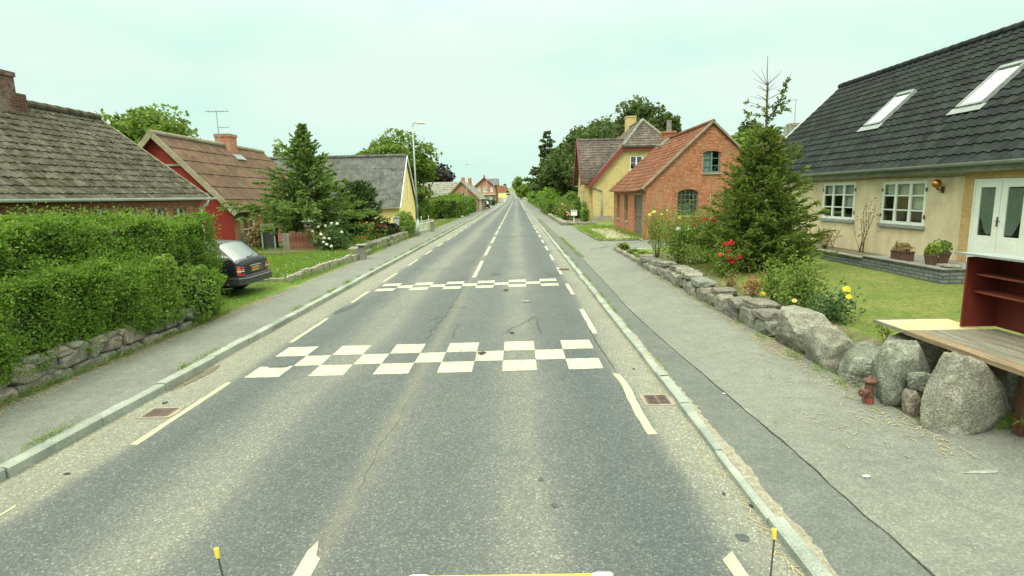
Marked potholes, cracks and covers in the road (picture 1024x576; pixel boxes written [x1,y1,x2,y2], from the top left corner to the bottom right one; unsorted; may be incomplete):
drain grate [638,393,677,406]
drain grate [136,406,185,419]
